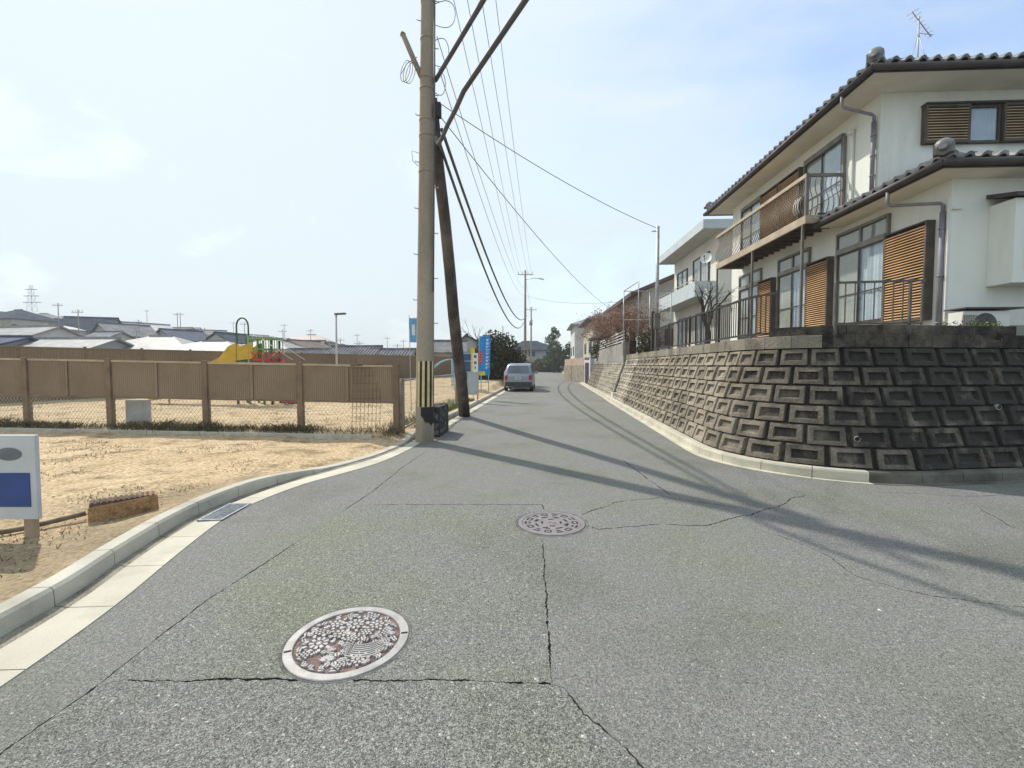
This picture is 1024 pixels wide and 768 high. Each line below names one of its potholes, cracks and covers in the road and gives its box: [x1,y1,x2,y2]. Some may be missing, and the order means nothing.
drain grate [197,503,251,522]
manhole cover [279,606,412,684]
crack [777,535,1024,608]
crack [107,541,644,768]
crack [582,463,802,530]
manhole cover [515,511,589,537]
